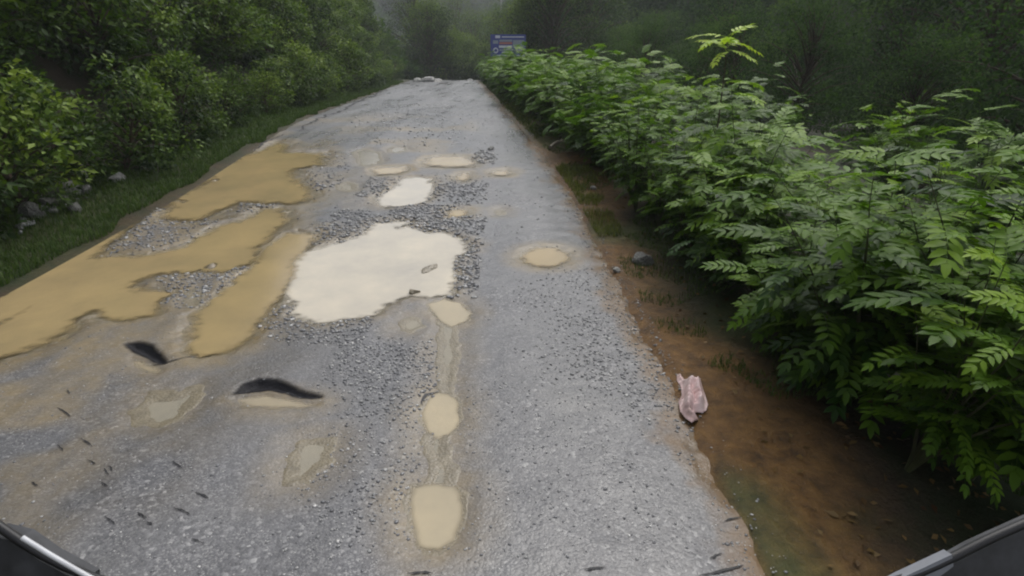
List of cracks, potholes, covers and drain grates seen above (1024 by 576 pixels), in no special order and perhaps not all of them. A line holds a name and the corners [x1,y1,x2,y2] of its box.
pothole [127,384,206,428]
pothole [282,437,338,487]
pothole [0,206,297,363]
pothole [156,140,333,223]
pothole [402,482,470,557]
pothole [417,390,464,439]
pothole [234,379,322,407]
pothole [179,230,328,360]
pothole [417,155,480,169]
pothole [516,246,574,269]
pothole [372,176,437,209]
pothole [281,219,475,325]
